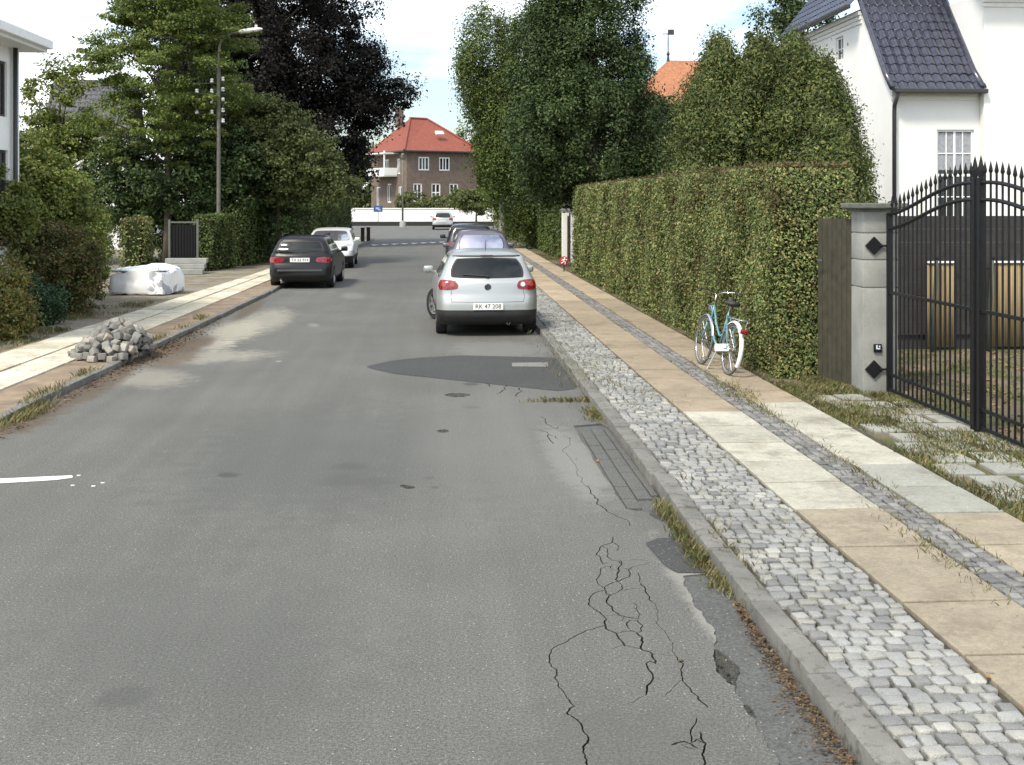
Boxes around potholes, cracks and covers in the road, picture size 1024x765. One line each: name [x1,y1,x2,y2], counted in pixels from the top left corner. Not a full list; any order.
crack [541,417,709,765]
pothole [713,649,740,686]
